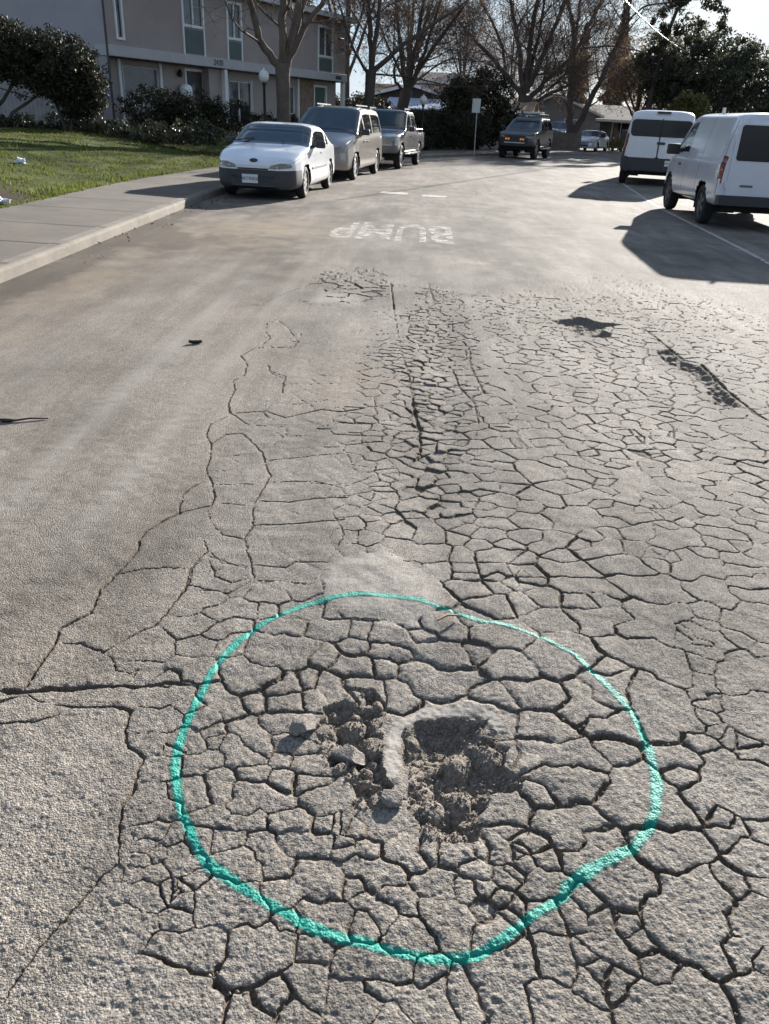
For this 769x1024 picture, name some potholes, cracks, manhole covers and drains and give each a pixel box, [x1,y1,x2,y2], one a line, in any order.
pothole [399,717,525,845]
crack [0,267,769,1024]
pothole [314,686,394,811]
pothole [656,349,742,408]
pothole [550,316,623,338]
